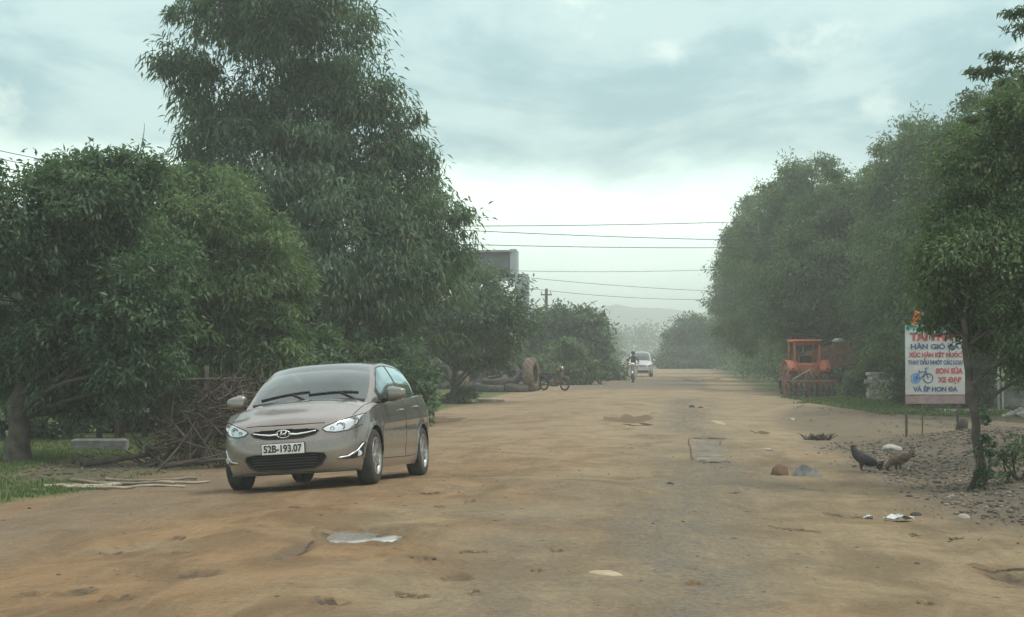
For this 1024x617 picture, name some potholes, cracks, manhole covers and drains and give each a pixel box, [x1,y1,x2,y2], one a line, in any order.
pothole [310,597,353,606]
pothole [310,522,416,546]
pothole [440,572,477,582]
pothole [603,414,654,423]
pothole [394,590,430,599]
pothole [50,588,99,597]
